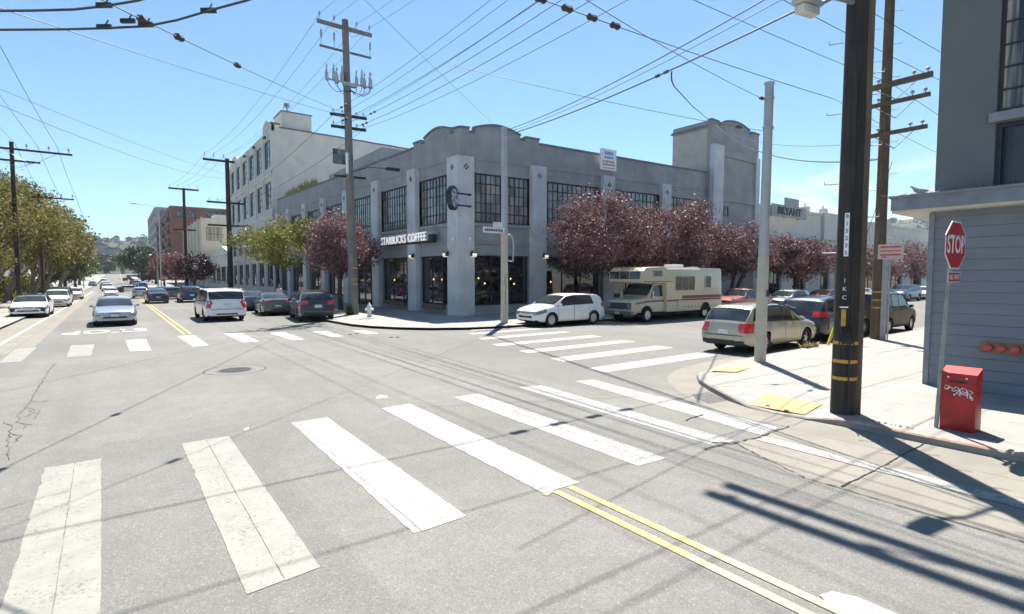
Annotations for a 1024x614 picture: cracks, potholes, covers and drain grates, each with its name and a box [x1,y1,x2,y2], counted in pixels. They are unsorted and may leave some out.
crack [841,443,924,487]
manhole cover [203,365,266,375]
crack [4,363,55,460]
crack [704,426,789,449]
